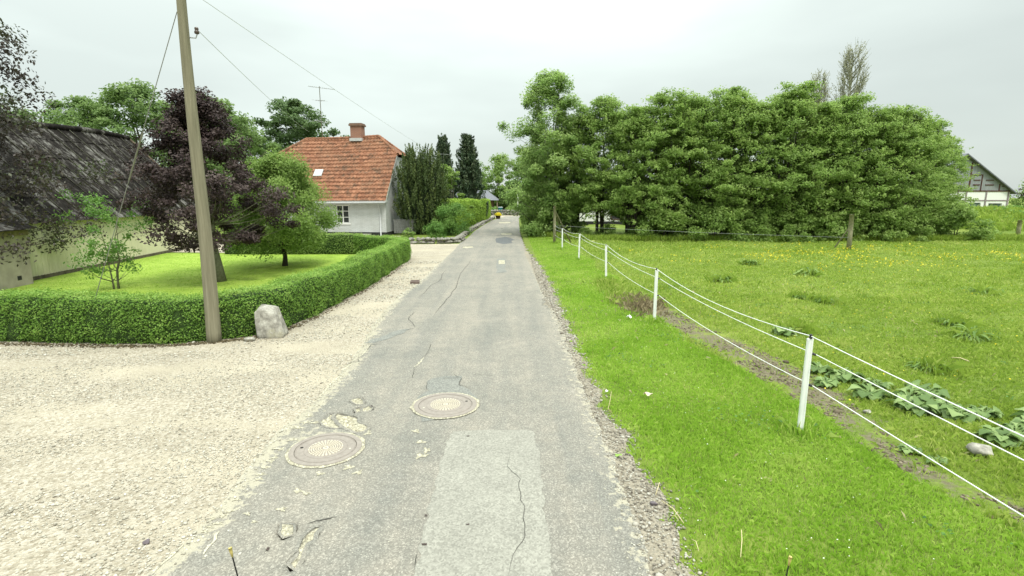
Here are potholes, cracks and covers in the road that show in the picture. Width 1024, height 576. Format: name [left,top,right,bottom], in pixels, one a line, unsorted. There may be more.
crack [507,455,525,575]
pothole [319,414,342,429]
manhole cover [410,392,479,419]
manhole cover [285,432,365,468]
pothole [277,523,296,539]
pothole [331,412,370,434]
pothole [286,525,323,571]
